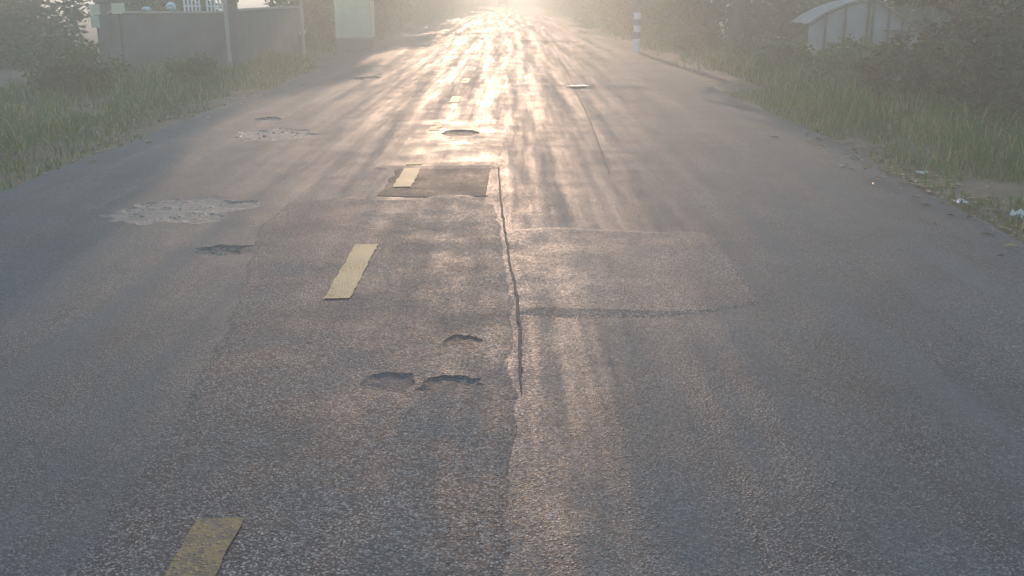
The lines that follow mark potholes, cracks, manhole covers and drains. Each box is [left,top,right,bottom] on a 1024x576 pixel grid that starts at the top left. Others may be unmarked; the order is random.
crack [556,53,609,174]
pothole [441,334,483,352]
pothole [416,375,485,396]
pothole [358,372,416,394]
pothole [235,128,322,141]
pothole [193,244,252,255]
pothole [99,196,266,225]
